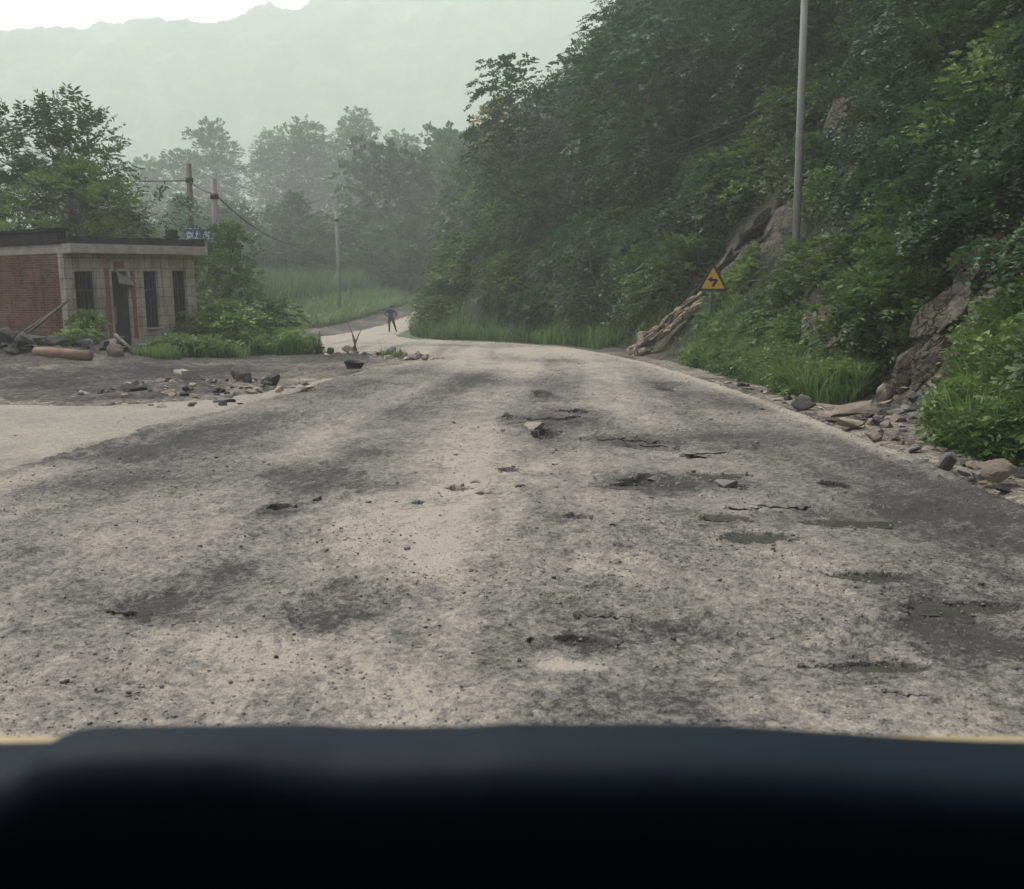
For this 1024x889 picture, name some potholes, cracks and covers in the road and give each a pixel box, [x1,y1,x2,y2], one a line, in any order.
pothole [783,567,942,592]
pothole [801,478,870,493]
pothole [715,482,766,493]
pothole [864,596,1024,625]
pothole [589,470,704,491]
pothole [667,509,783,526]
crack [860,684,932,706]
pothole [524,428,571,444]
pothole [692,528,834,551]
crack [498,413,741,459]
